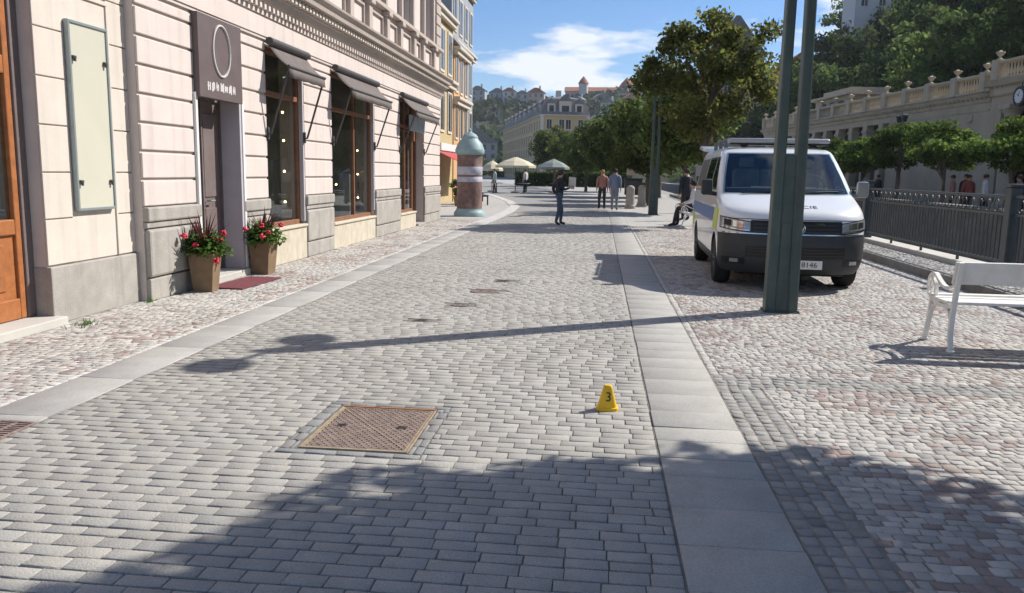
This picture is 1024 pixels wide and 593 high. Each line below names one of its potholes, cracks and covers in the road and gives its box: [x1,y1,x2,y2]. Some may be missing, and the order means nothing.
manhole cover [298,405,437,454]
